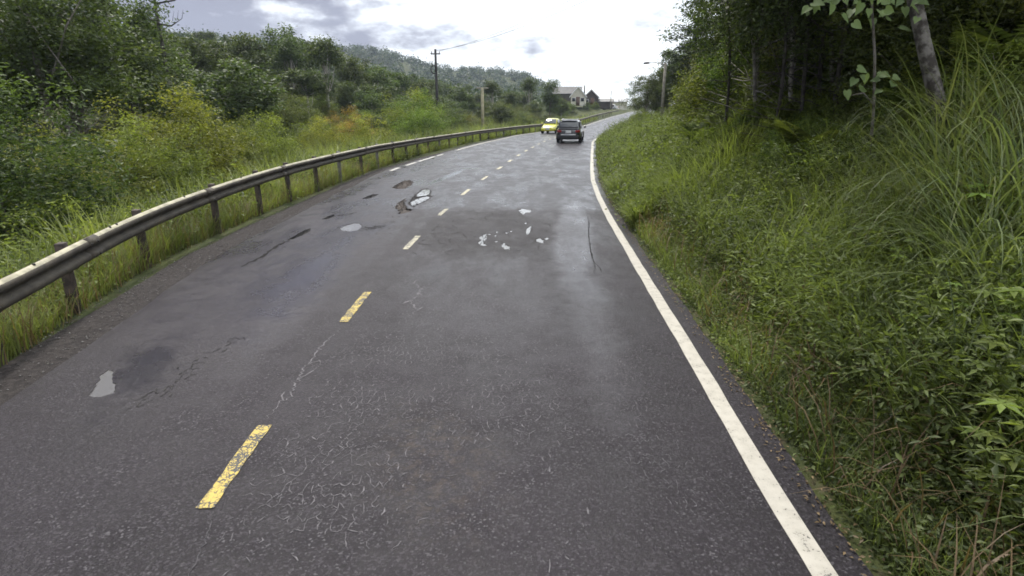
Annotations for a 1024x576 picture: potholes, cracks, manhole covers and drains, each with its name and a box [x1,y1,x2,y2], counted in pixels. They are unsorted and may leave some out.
pothole [89,370,116,397]
pothole [340,223,362,231]
pothole [408,188,433,207]
crack [243,188,427,266]
crack [267,327,342,419]
pothole [392,180,414,189]
crack [125,337,245,410]
crack [402,274,426,318]
pothole [395,198,412,214]
